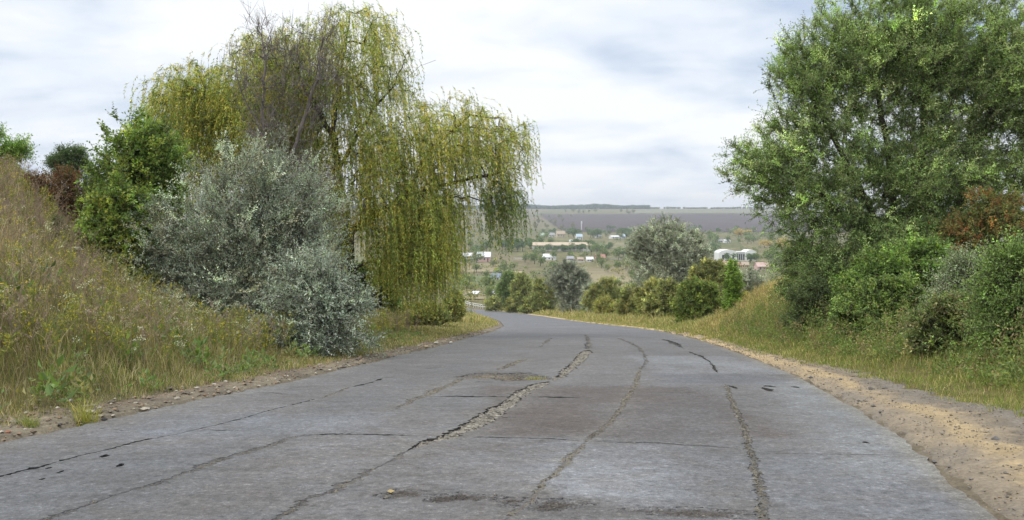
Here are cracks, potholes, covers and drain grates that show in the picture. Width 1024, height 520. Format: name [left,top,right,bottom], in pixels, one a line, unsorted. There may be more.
pothole [422,491,510,503]
pothole [454,373,552,382]
pothole [491,497,597,512]
crack [0,335,772,520]
pothole [371,488,429,500]
